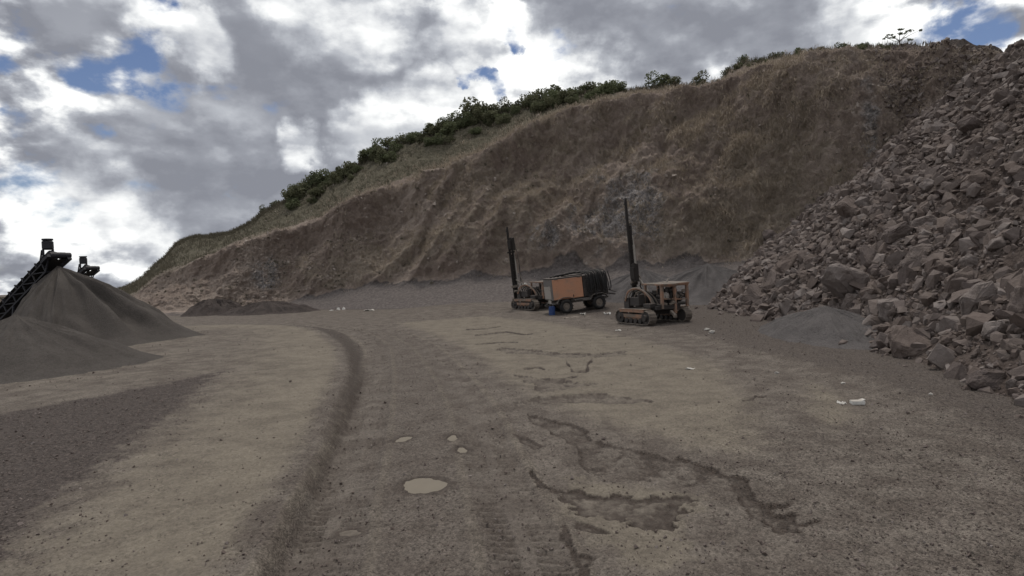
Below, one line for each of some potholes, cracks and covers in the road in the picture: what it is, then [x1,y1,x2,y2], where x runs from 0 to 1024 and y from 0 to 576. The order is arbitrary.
pothole [527,414,824,535]
crack [467,326,533,345]
